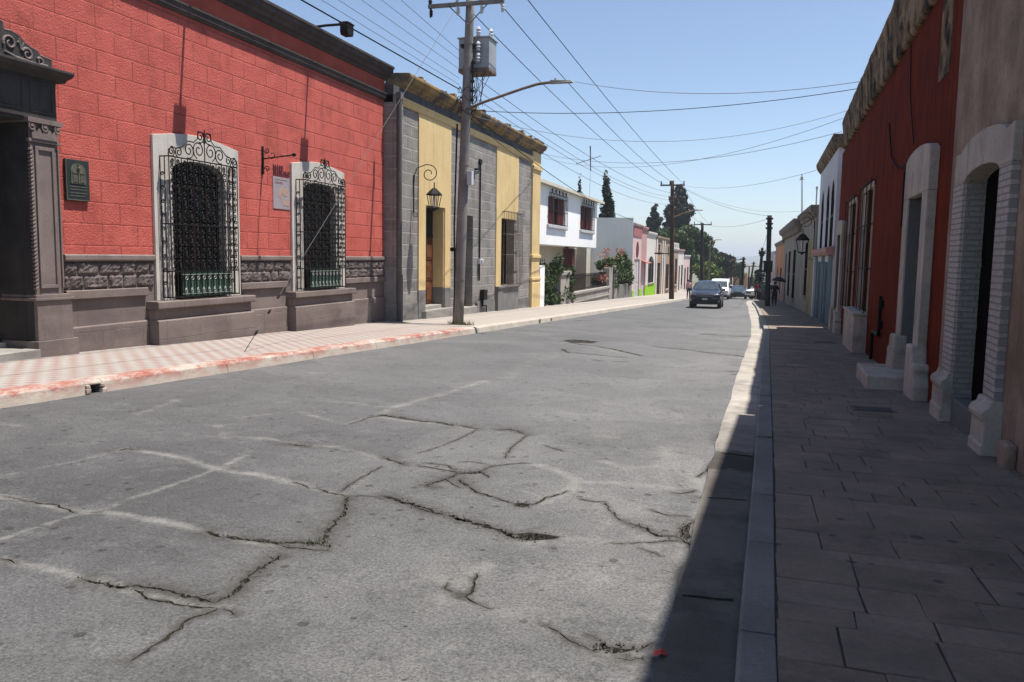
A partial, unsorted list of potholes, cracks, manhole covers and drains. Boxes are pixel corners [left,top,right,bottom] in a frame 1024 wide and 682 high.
utility cover [849,405,897,413]
crack [11,497,97,513]
crack [77,414,694,662]
pothole [507,530,565,543]
pothole [593,638,644,656]
